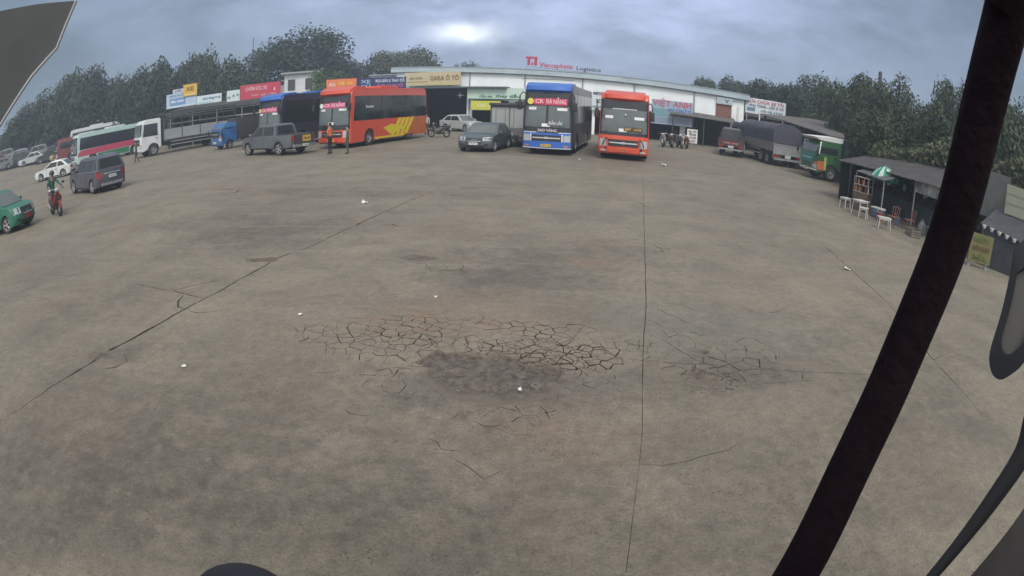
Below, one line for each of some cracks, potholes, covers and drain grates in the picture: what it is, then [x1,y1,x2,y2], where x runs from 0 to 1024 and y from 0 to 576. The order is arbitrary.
crack [0,191,434,421]
crack [424,439,502,486]
crack [293,302,870,436]
pothole [415,349,575,406]
